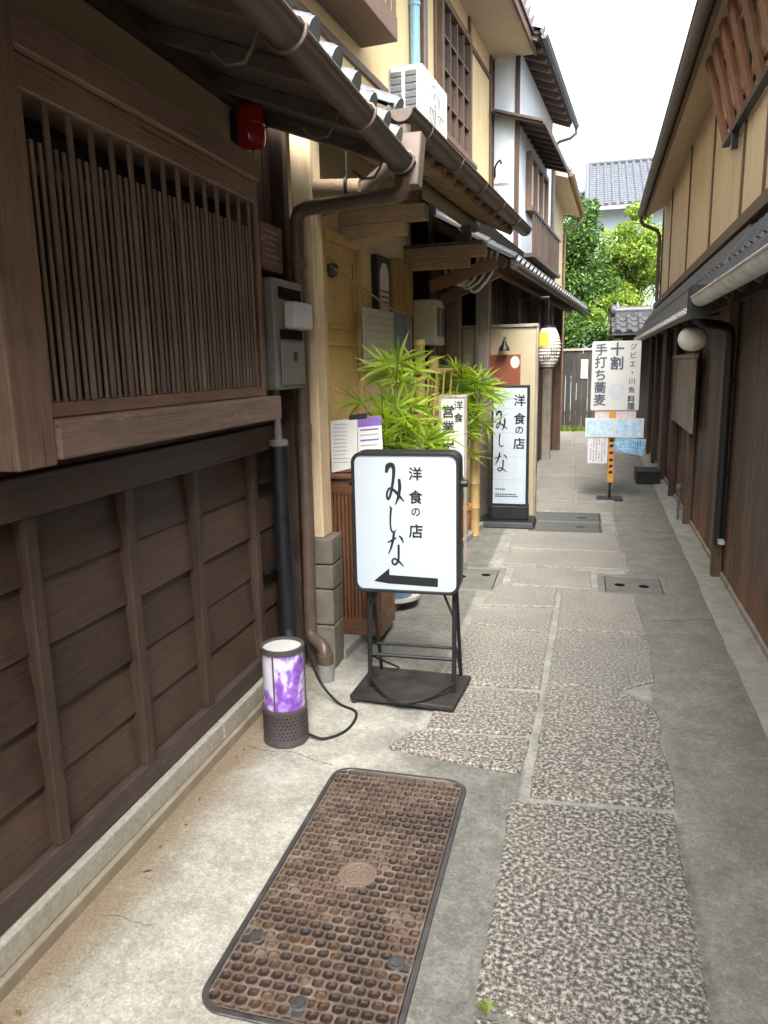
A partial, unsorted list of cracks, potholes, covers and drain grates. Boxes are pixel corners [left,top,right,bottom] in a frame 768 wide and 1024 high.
manhole cover [528,521,603,533]
manhole cover [597,574,673,598]
manhole cover [202,767,466,1024]
manhole cover [535,511,602,523]
manhole cover [459,566,507,592]
